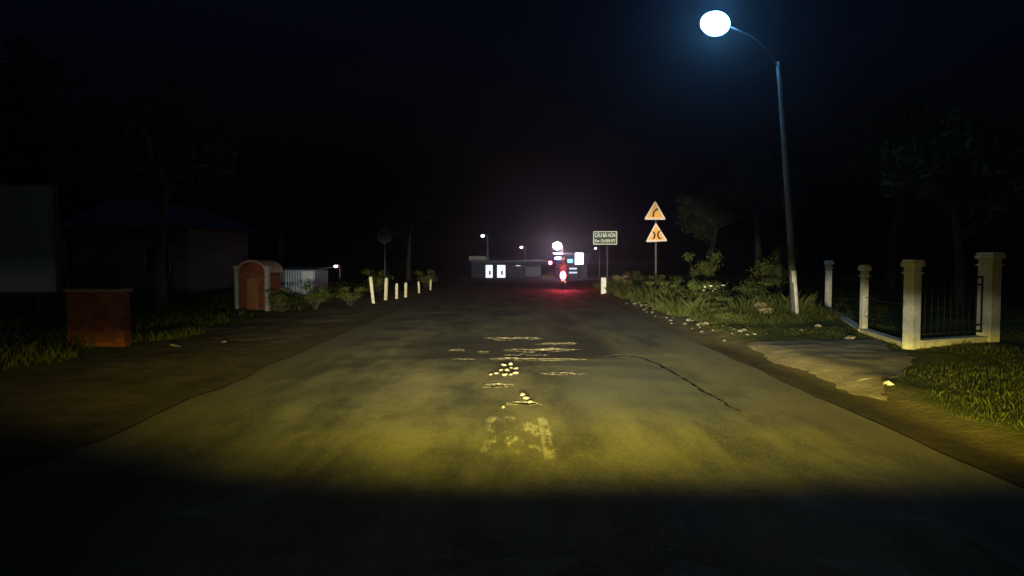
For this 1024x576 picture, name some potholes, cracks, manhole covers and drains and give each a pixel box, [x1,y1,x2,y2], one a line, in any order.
crack [601,354,741,412]
